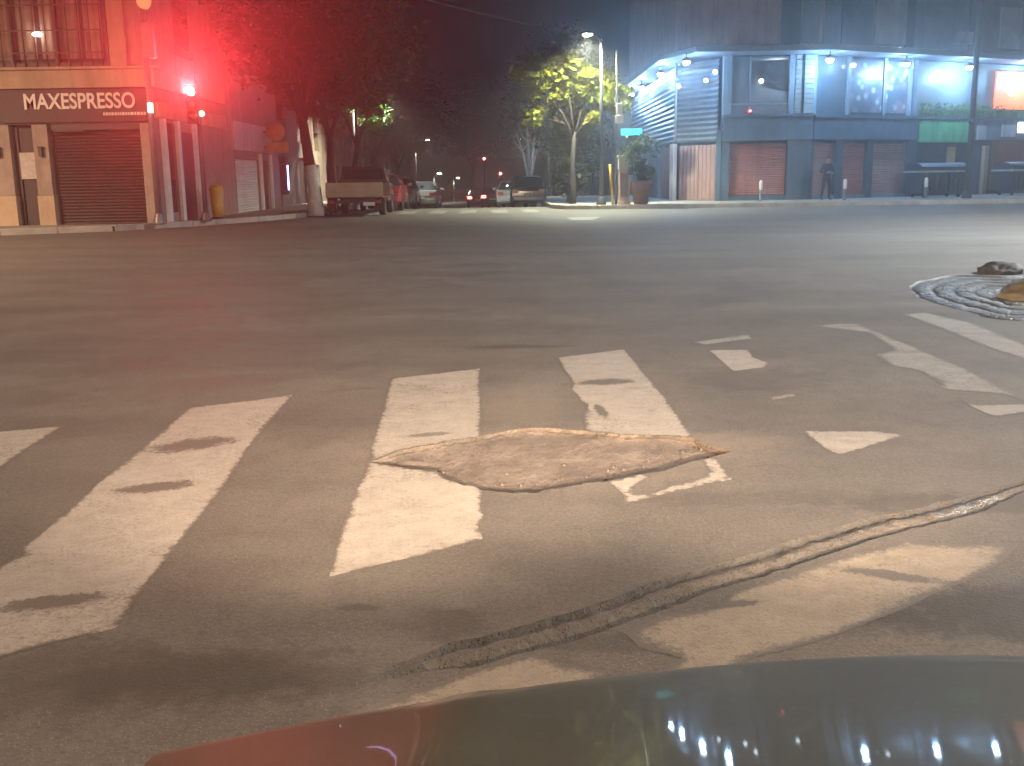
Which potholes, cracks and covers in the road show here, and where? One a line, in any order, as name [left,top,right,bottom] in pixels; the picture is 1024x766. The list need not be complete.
pothole [910,275,1024,321]
